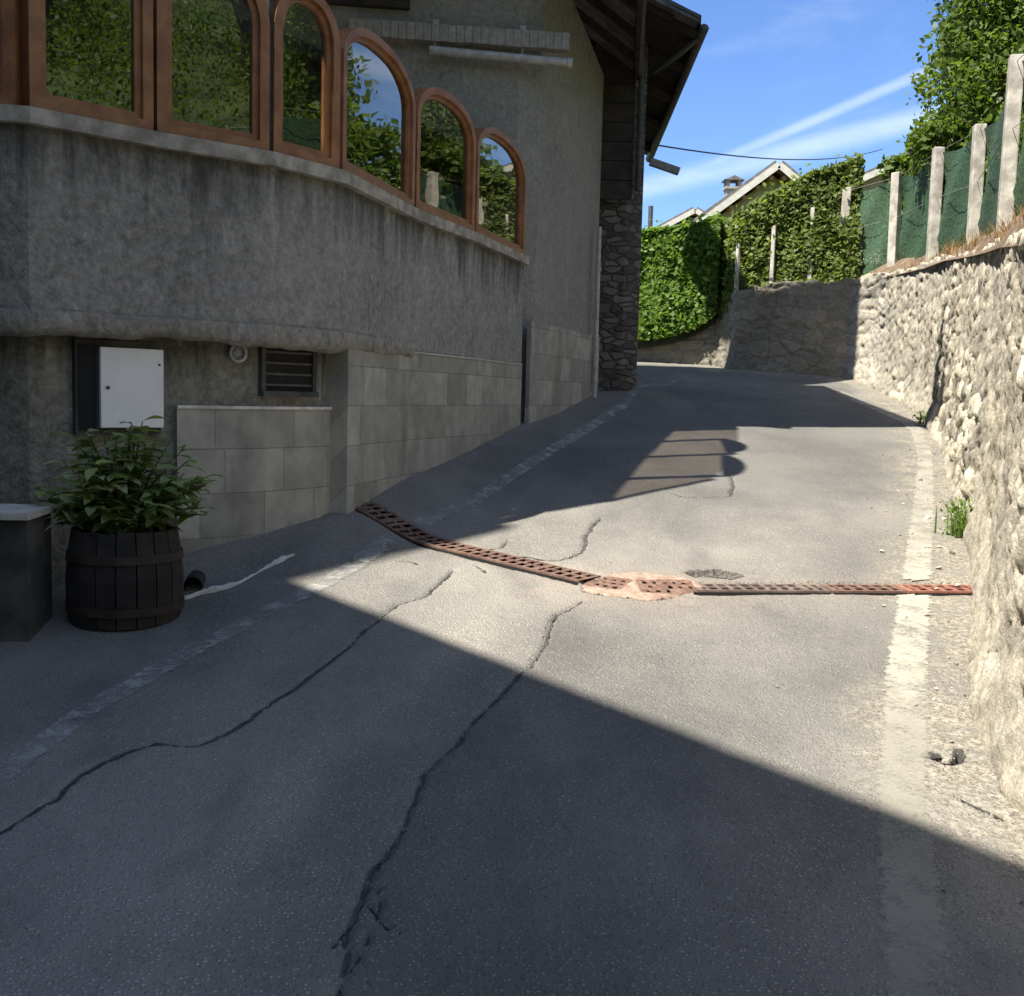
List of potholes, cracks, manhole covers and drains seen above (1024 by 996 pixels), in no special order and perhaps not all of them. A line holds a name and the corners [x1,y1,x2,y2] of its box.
drain grate [692,583,830,596]
drain grate [819,584,907,596]
crack [0,562,453,835]
crack [332,601,583,996]
drain grate [355,502,601,585]
crack [672,478,735,498]
drain grate [893,584,973,596]
crack [476,519,600,573]
